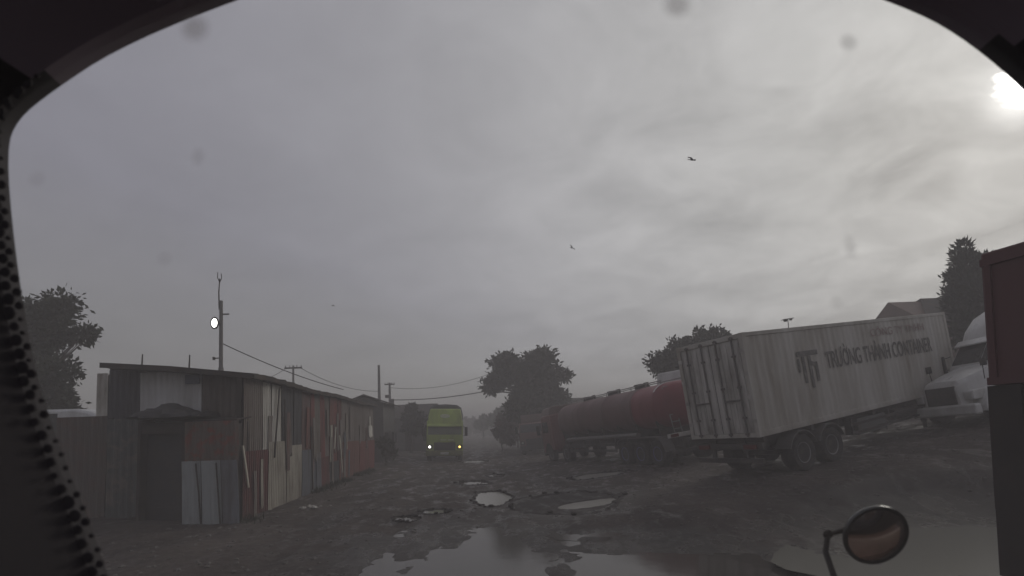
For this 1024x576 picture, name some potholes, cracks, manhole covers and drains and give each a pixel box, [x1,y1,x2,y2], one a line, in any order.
pothole [566,470,627,481]
pothole [505,490,628,516]
pothole [417,507,453,515]
pothole [391,513,422,524]
pothole [469,489,515,508]
